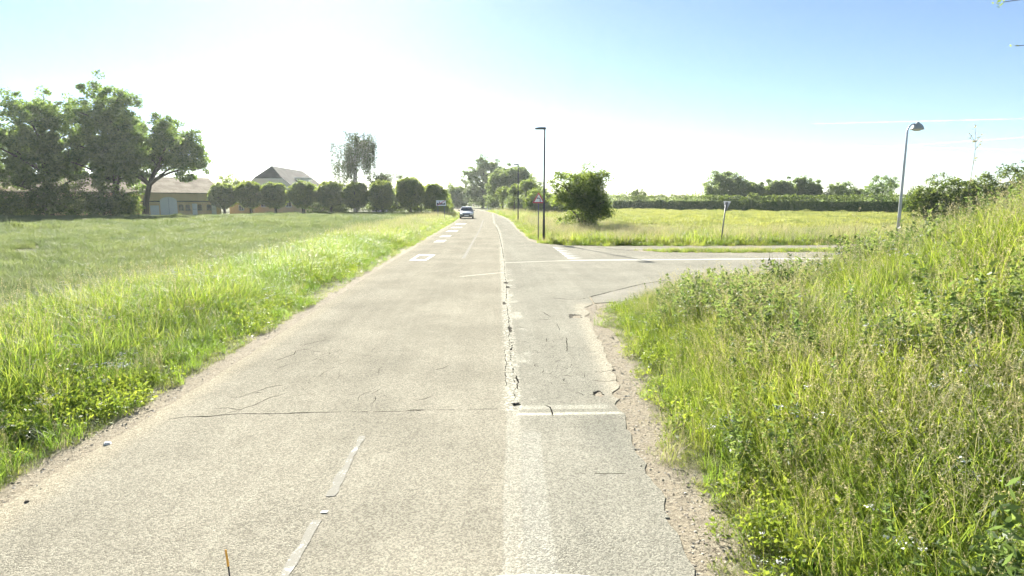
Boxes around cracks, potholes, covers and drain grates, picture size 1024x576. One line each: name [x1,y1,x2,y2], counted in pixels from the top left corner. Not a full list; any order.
crack [173,340,449,419]
crack [496,228,615,416]
